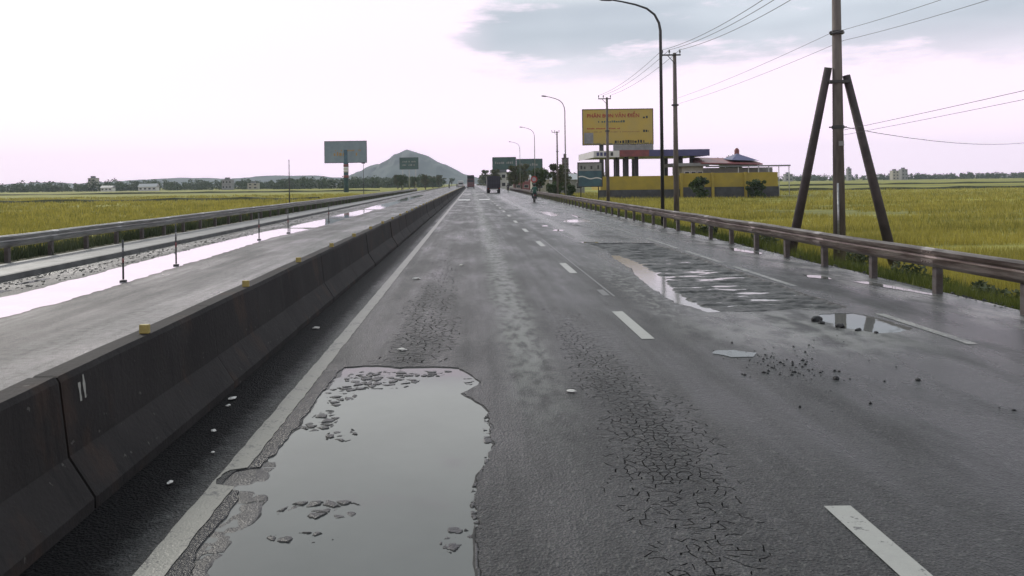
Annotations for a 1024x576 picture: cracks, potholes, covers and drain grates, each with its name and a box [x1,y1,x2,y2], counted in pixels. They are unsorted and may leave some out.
pothole [191,365,496,576]
crack [368,248,461,363]
pothole [590,243,846,312]
pothole [819,313,912,333]
crack [542,307,771,576]
